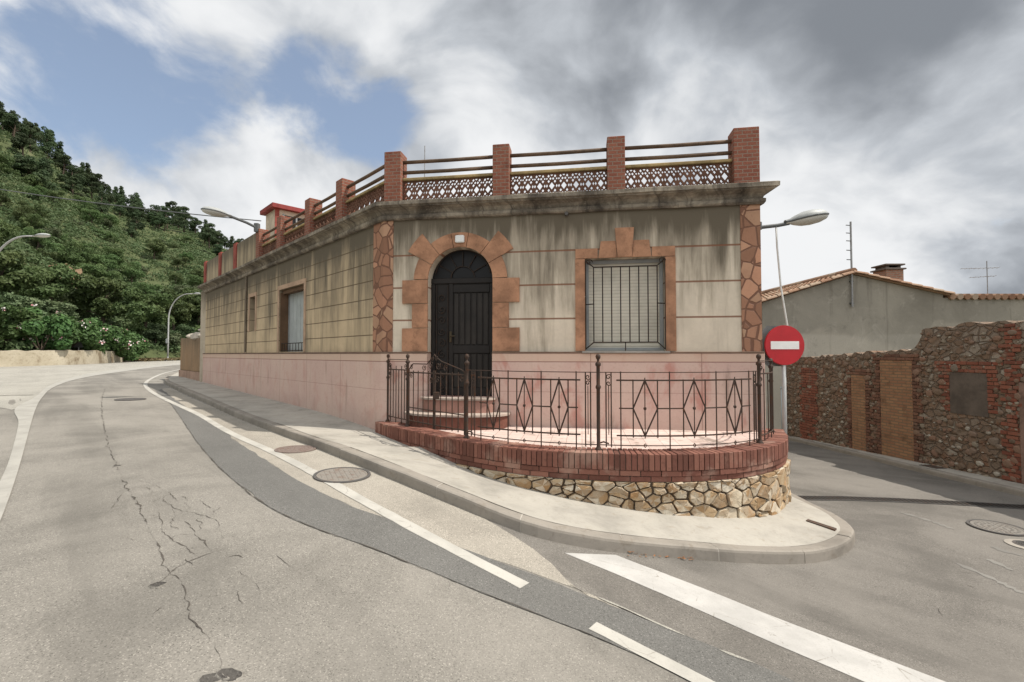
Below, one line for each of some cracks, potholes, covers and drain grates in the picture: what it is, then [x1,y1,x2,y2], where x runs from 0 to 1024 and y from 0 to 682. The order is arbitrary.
pothole [197,672,230,682]
pothole [215,668,245,682]
crack [101,396,259,669]
manhole cover [966,519,1024,536]
manhole cover [274,445,317,453]
manhole cover [1004,539,1024,549]
manhole cover [313,467,371,483]
